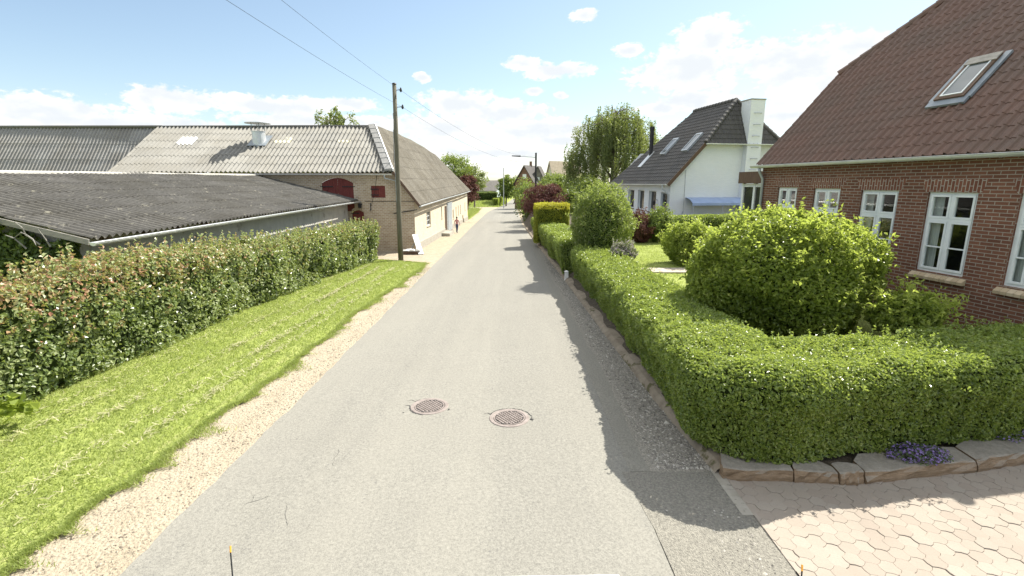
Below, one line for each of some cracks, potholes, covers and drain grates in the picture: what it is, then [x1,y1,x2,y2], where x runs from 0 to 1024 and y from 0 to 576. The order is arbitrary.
manhole cover [489,409,529,427]
manhole cover [410,398,449,415]
